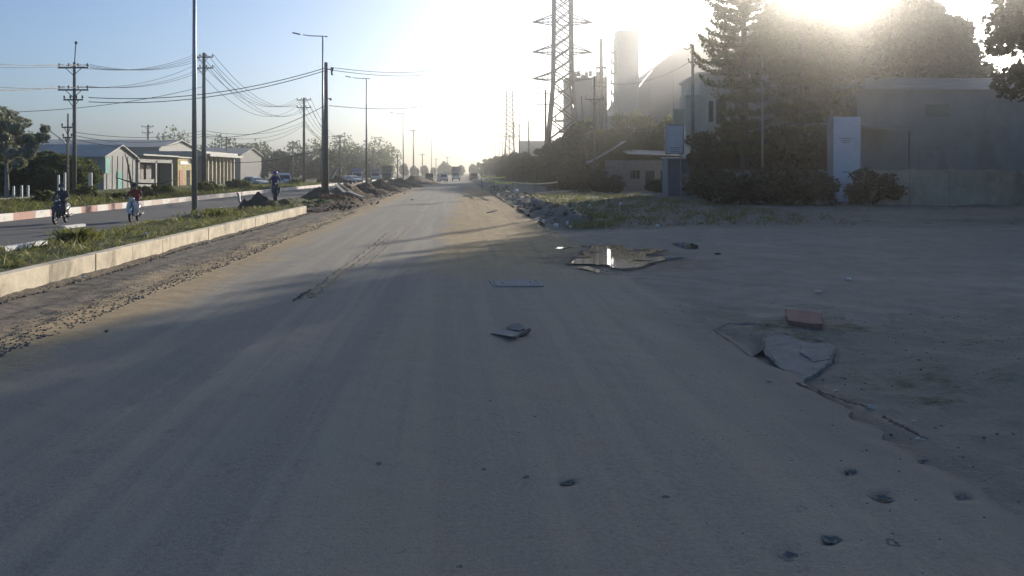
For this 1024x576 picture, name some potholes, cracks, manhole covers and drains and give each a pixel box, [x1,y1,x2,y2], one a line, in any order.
pothole [782,551,799,562]
pothole [872,493,897,501]
crack [796,382,928,439]
pothole [713,322,763,357]
pothole [821,535,845,544]
